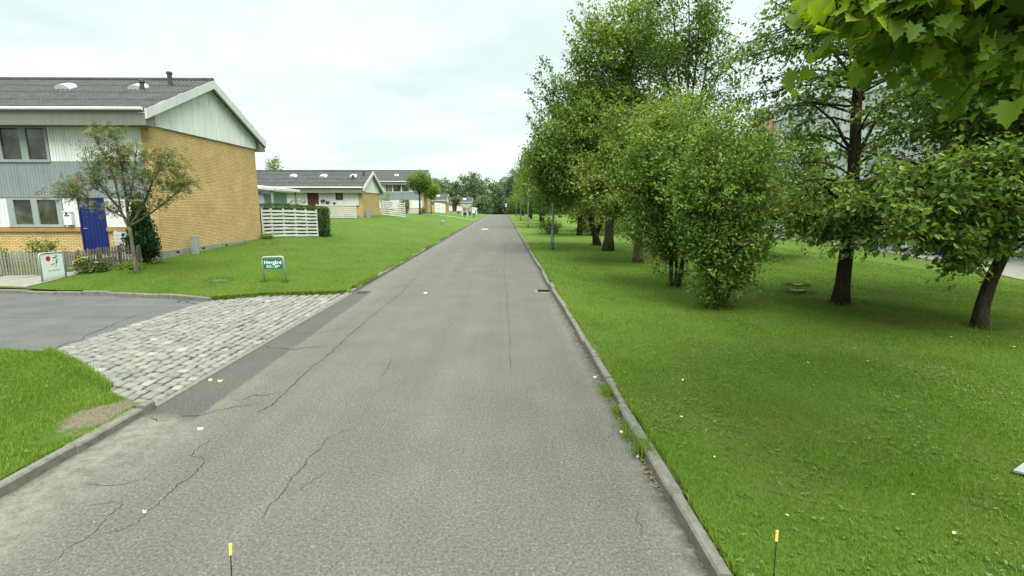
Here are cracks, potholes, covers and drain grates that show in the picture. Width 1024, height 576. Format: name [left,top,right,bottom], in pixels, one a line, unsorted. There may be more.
crack [195,277,416,416]
crack [254,430,347,525]
crack [38,441,209,573]
